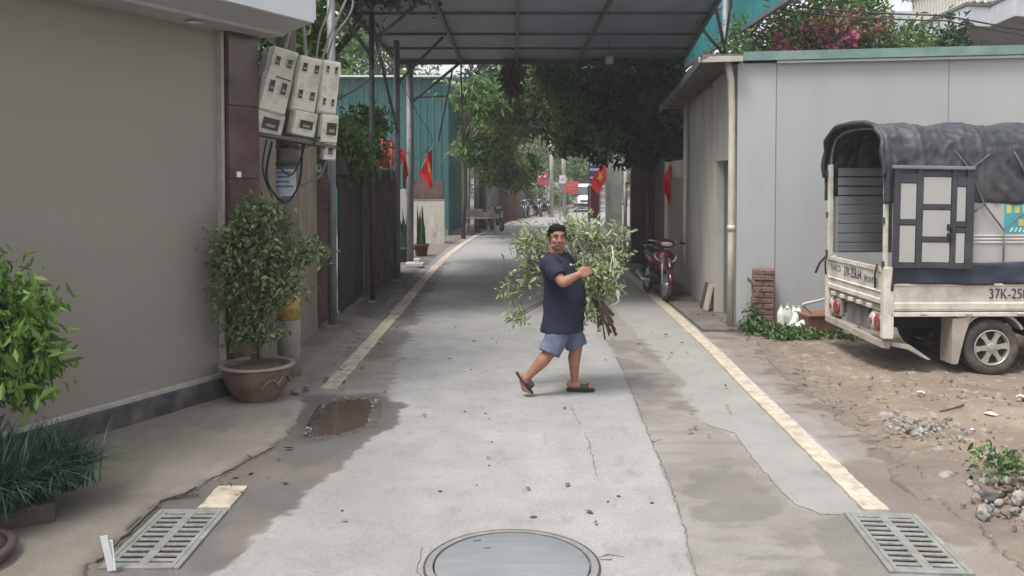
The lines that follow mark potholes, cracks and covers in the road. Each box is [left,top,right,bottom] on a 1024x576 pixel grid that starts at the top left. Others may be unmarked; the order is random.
crack [704,423,841,515]
crack [617,357,698,576]
crack [97,446,276,564]
pothole [302,396,383,440]
drain grate [99,509,229,570]
drain grate [844,512,976,576]
manhole cover [423,529,601,576]
